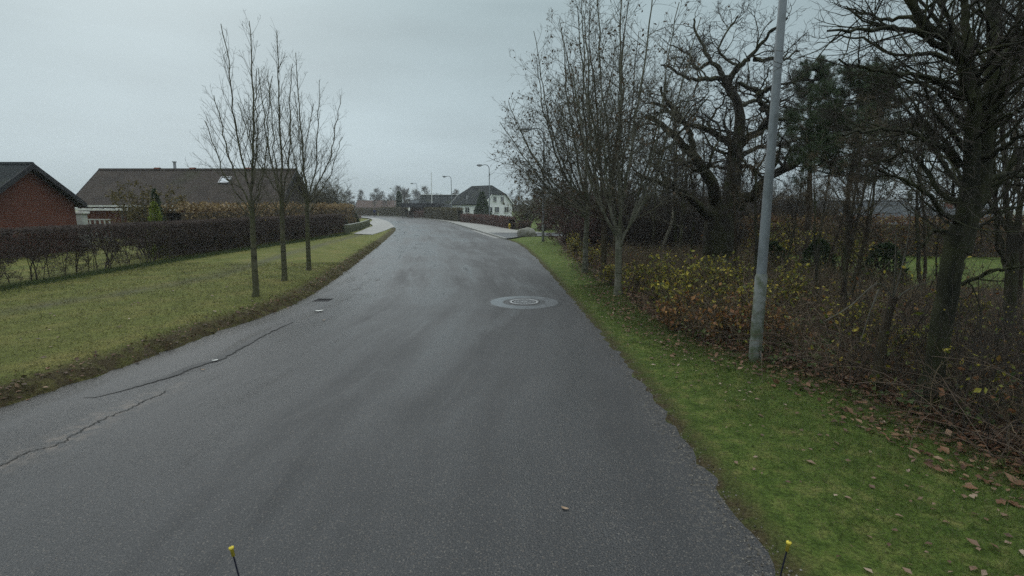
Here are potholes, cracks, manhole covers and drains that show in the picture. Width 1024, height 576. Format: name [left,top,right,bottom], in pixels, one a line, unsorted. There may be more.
manhole cover [486,296,562,310]
crack [0,322,293,466]
